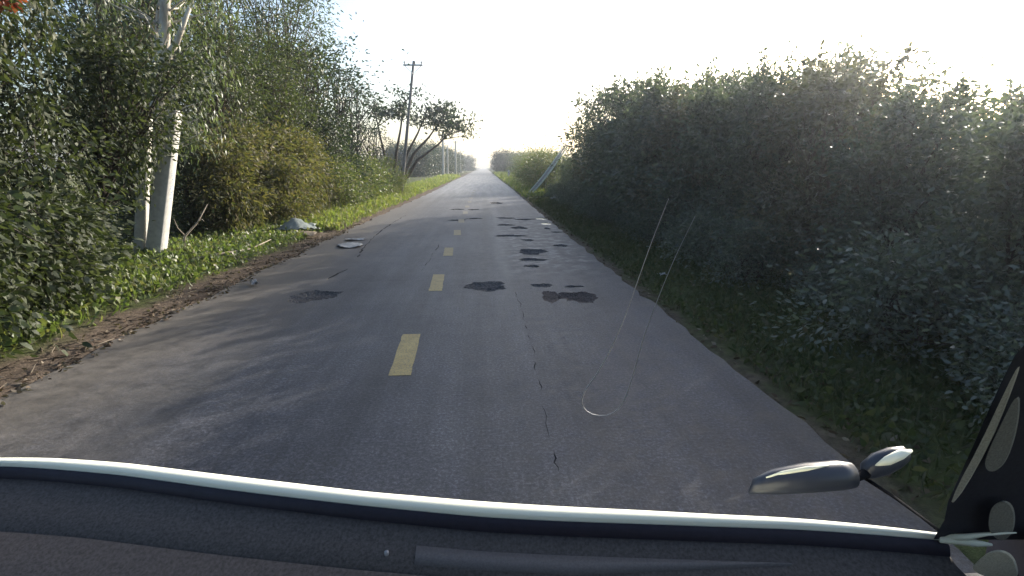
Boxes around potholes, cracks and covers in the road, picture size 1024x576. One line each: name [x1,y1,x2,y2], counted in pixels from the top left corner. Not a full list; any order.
crack [515,292,559,472]
pothole [542,291,562,303]
crack [328,215,406,279]
pothole [558,291,598,303]
pothole [463,281,506,292]
pothole [287,290,342,304]
